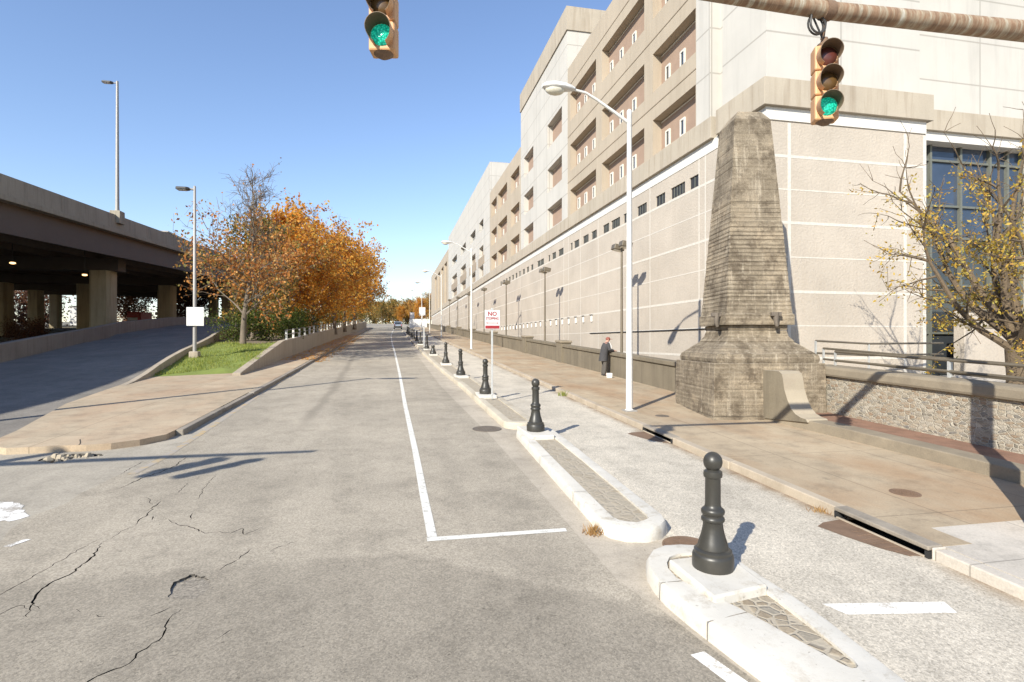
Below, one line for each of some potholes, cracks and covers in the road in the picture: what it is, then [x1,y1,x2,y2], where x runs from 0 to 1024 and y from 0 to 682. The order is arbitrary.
drain grate [819,505,972,559]
crack [87,608,175,682]
pothole [38,452,103,463]
manhole cover [889,488,922,497]
drain grate [628,424,697,444]
crack [0,459,262,617]
manhole cover [662,536,698,546]
